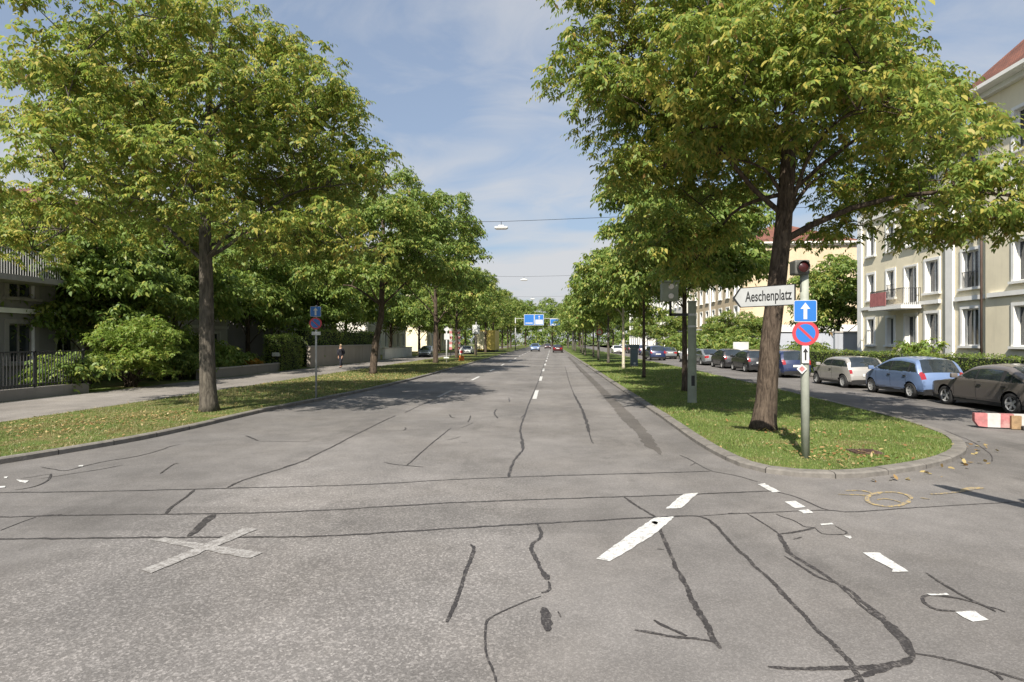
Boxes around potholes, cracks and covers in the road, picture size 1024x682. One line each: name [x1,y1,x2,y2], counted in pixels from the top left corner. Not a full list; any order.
crack [385,415,474,467]
crack [921,572,1005,612]
crack [493,357,547,477]
crack [14,444,180,490]
